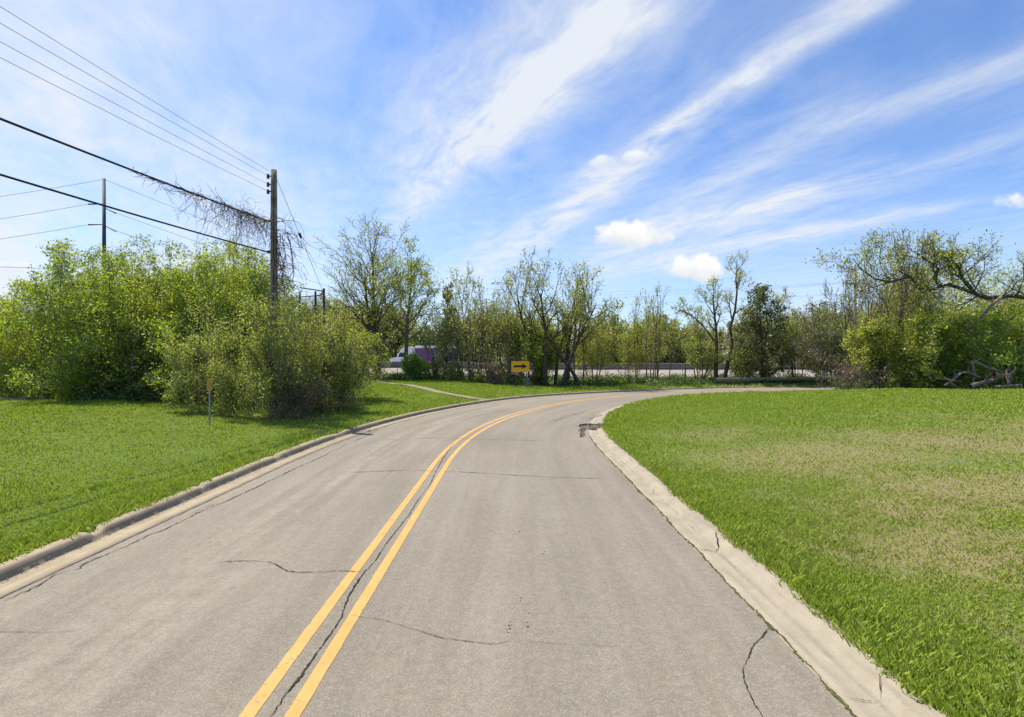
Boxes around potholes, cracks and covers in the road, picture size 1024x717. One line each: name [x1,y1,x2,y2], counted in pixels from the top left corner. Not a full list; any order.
crack [6,426,388,600]
crack [743,628,769,717]
